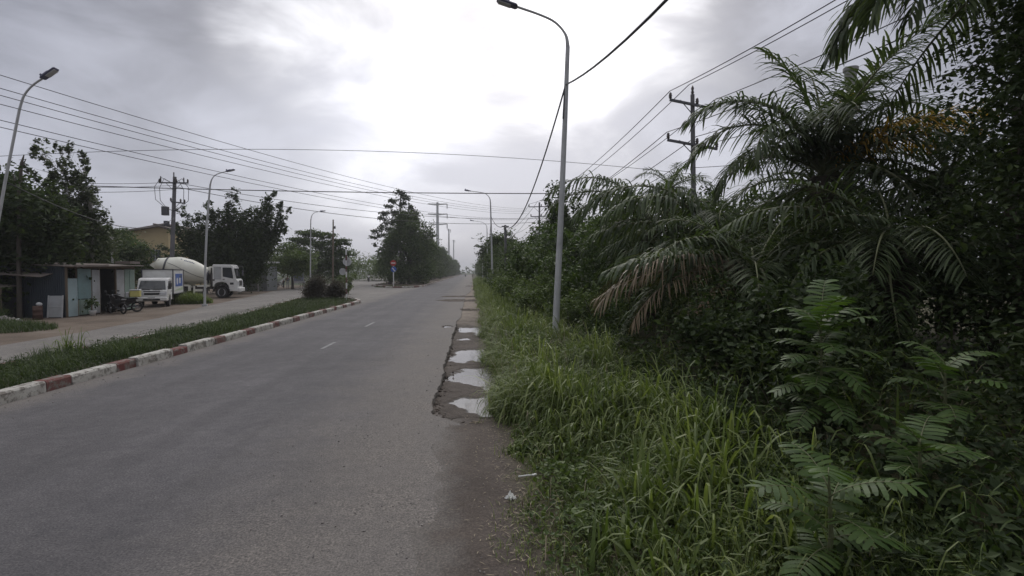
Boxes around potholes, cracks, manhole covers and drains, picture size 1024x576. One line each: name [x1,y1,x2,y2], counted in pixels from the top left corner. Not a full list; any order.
pothole [443,365,495,394]
pothole [446,346,487,366]
pothole [436,392,493,419]
pothole [453,325,484,344]
